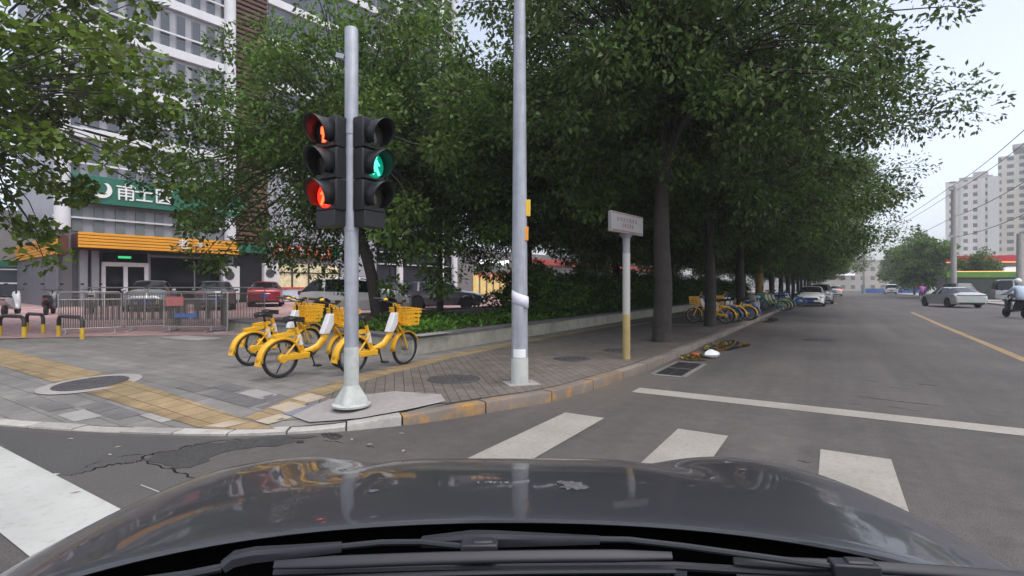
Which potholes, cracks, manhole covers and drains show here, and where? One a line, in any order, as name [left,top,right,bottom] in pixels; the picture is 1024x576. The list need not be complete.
manhole cover [427,374,480,384]
crack [71,440,231,478]
manhole cover [50,376,129,391]
drain grate [650,361,707,378]
